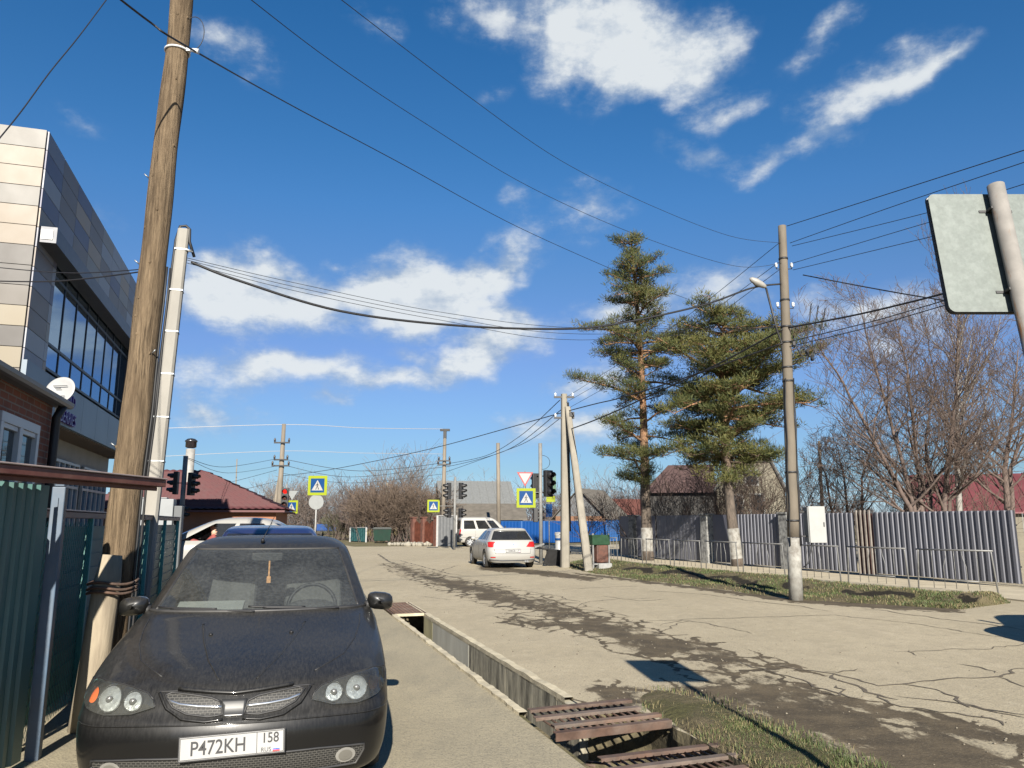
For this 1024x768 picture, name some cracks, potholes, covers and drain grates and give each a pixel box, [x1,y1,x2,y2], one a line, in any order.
drain grate [527,698,672,742]
drain grate [385,602,426,617]
crack [425,586,1024,656]
drain grate [586,742,764,768]
crack [741,662,1024,725]
